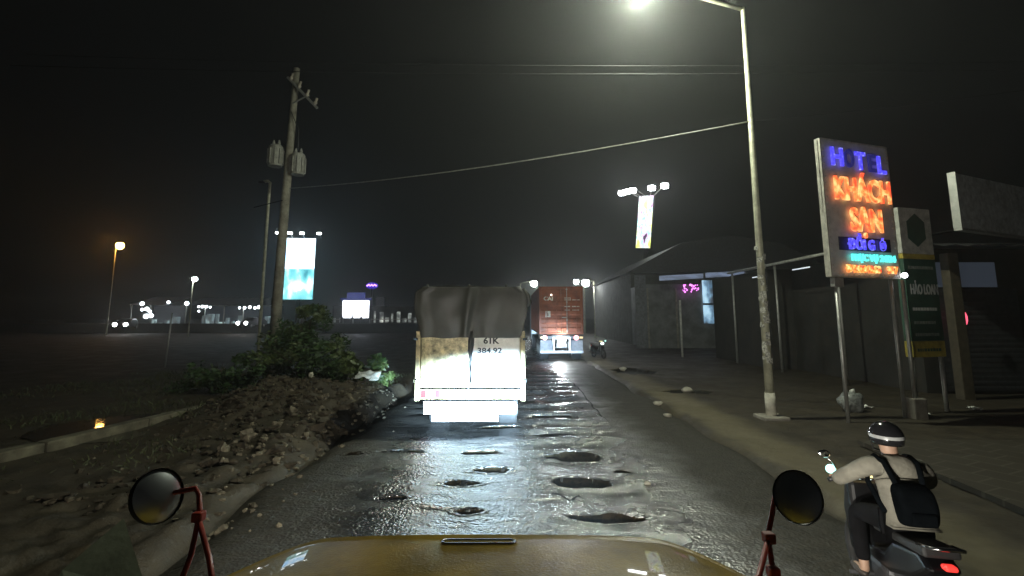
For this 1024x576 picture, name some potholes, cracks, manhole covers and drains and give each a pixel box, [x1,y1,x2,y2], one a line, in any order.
pothole [602,367,668,376]
pothole [429,479,490,488]
pothole [448,506,490,517]
pothole [548,510,663,526]
pothole [536,475,626,491]
pothole [529,449,612,464]
pothole [366,494,418,502]
pothole [464,465,523,475]
